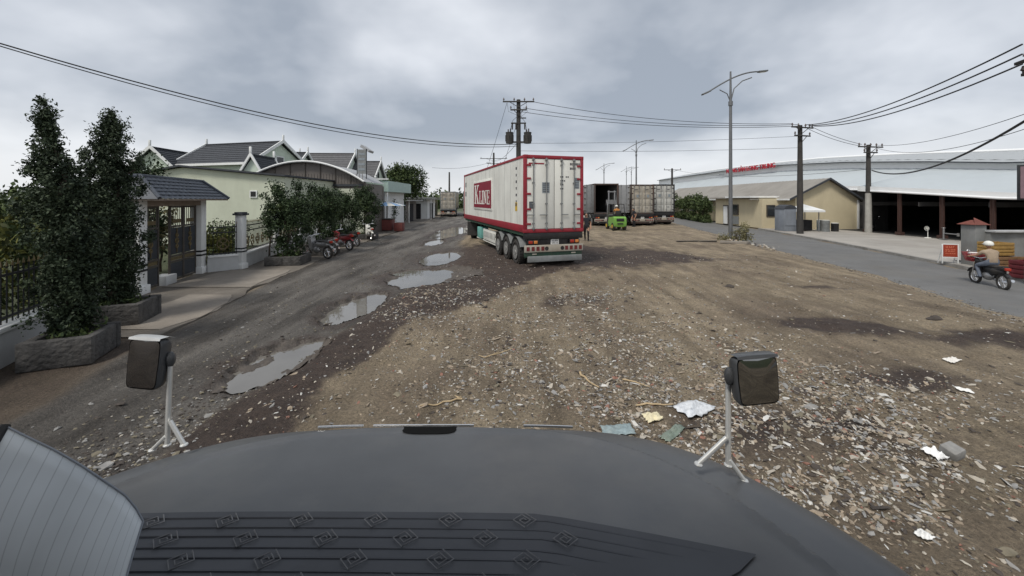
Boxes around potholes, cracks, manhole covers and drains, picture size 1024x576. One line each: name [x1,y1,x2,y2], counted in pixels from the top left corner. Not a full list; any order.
pothole [210,337,333,395]
pothole [427,225,467,240]
pothole [383,265,484,290]
pothole [315,291,389,326]
pothole [418,251,464,266]
